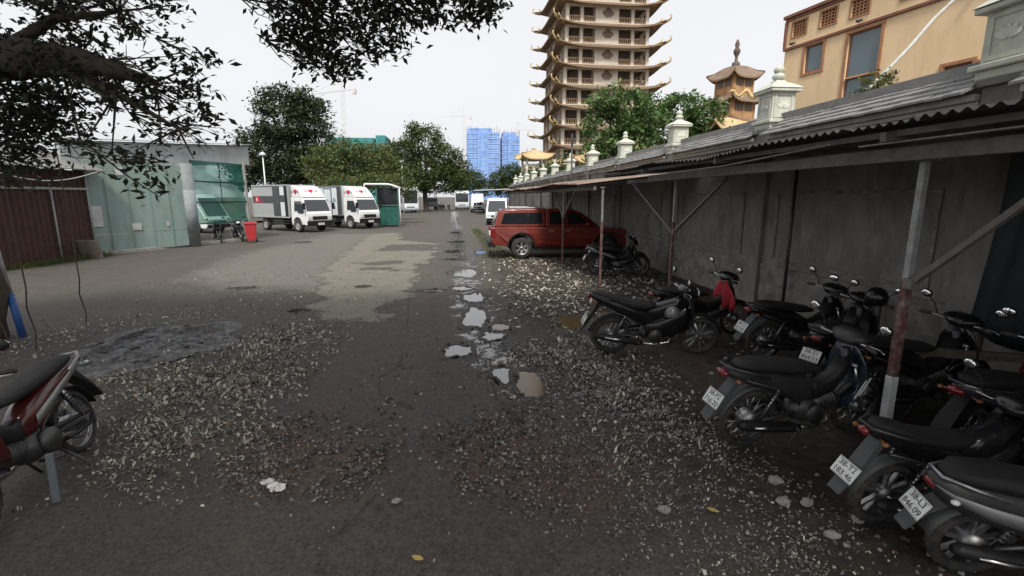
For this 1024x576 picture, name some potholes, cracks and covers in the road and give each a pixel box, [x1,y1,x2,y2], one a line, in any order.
pothole [458,291,488,304]
pothole [457,304,491,331]
pothole [478,329,509,343]
pothole [508,367,552,404]
crack [339,491,397,534]
pothole [549,313,595,333]
crack [378,351,414,409]
pothole [488,363,520,389]
pothole [444,268,482,280]
pothole [439,341,477,359]
